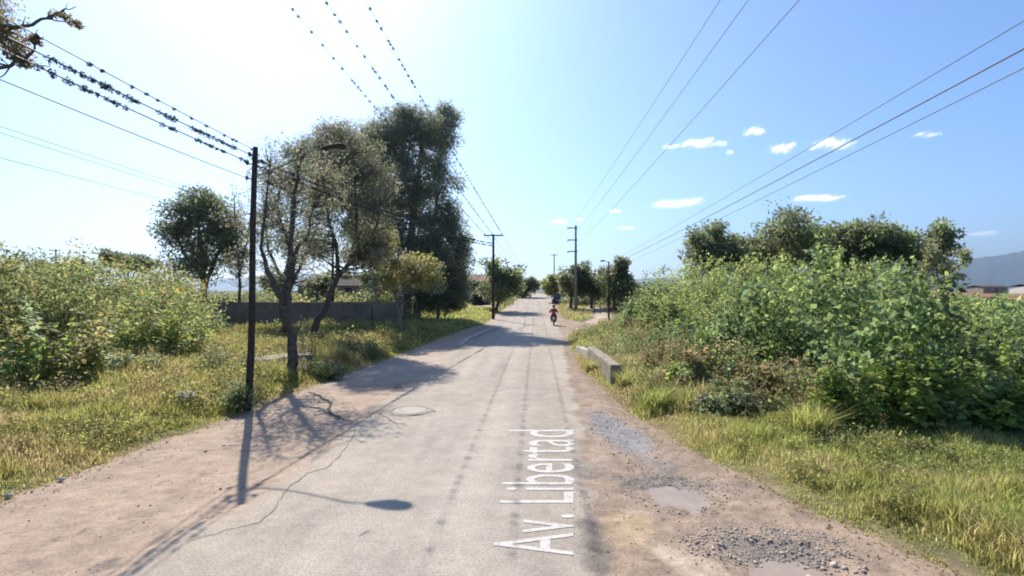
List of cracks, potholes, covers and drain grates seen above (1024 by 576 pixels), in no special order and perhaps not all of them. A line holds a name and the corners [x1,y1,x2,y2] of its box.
manhole cover [388,406,434,417]
pothole [620,476,741,523]
crack [190,392,356,541]
pothole [716,535,870,576]
